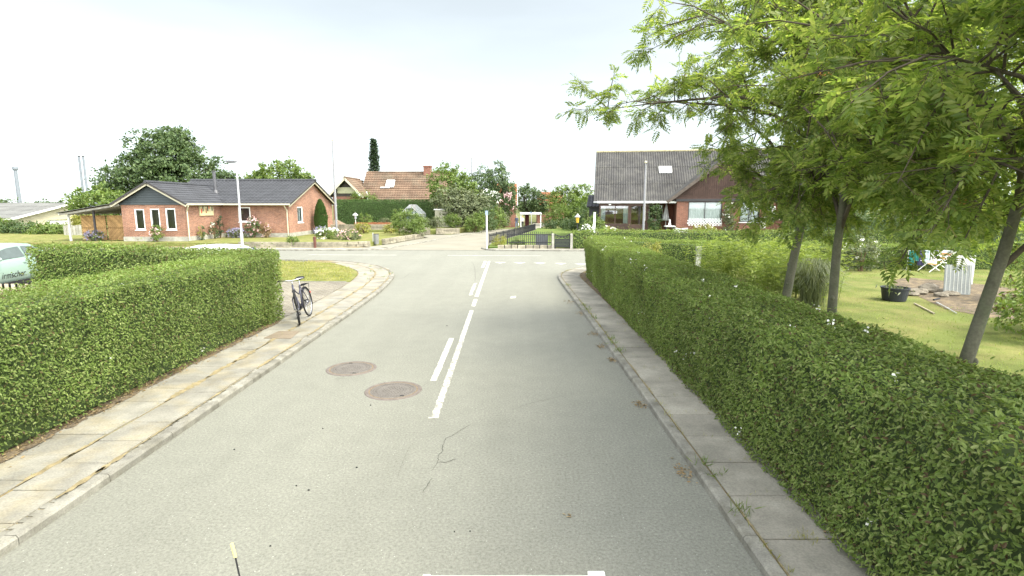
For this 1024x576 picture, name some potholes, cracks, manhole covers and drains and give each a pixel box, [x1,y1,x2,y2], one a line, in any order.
manhole cover [326,361,377,376]
manhole cover [364,381,422,400]
